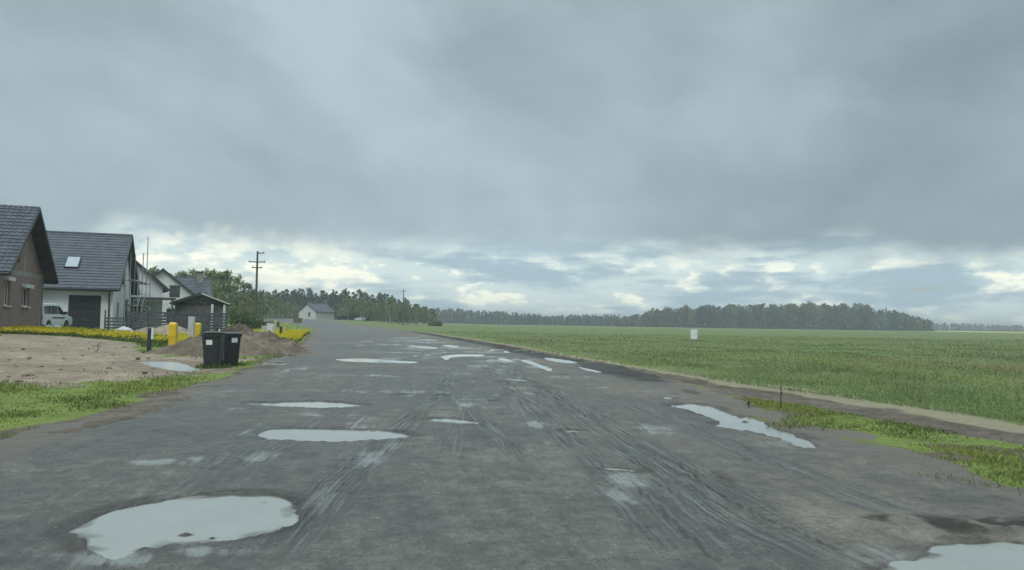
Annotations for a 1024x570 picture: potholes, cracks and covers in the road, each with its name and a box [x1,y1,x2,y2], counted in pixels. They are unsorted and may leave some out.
pothole [841,524,1024,570]
pothole [222,398,387,409]
pothole [564,365,617,373]
pothole [27,486,329,570]
pothole [403,414,500,427]
pothole [513,359,568,372]
pothole [232,424,436,444]
pothole [650,400,844,452]
